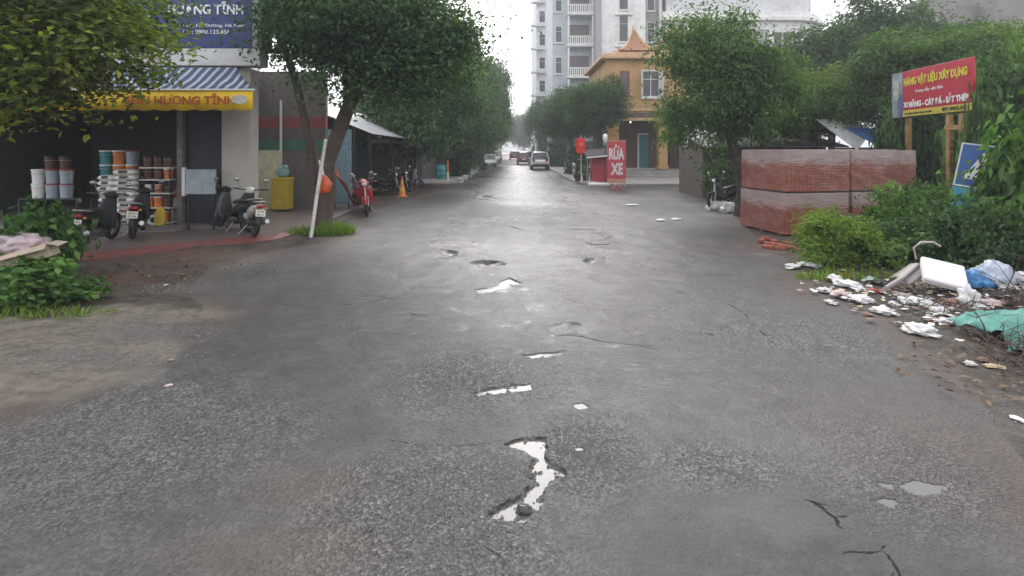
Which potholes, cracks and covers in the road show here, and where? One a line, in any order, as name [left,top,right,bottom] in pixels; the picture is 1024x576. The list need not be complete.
crack [561,335,662,352]
pothole [522,350,568,358]
pothole [487,437,567,523]
crack [803,499,901,576]
pothole [541,321,595,334]
pothole [474,277,524,294]
pothole [474,383,533,398]
crack [698,302,781,348]
pothole [870,480,953,511]
pothole [469,259,507,267]
